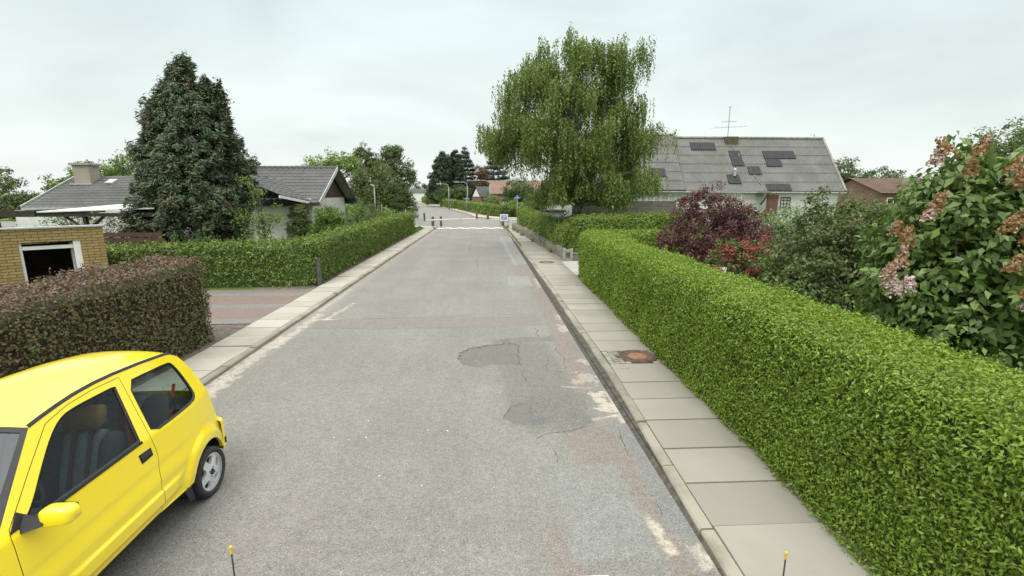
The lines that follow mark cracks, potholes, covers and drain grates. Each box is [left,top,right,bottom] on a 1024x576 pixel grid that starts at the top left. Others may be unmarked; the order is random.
manhole cover [619,350,657,364]
